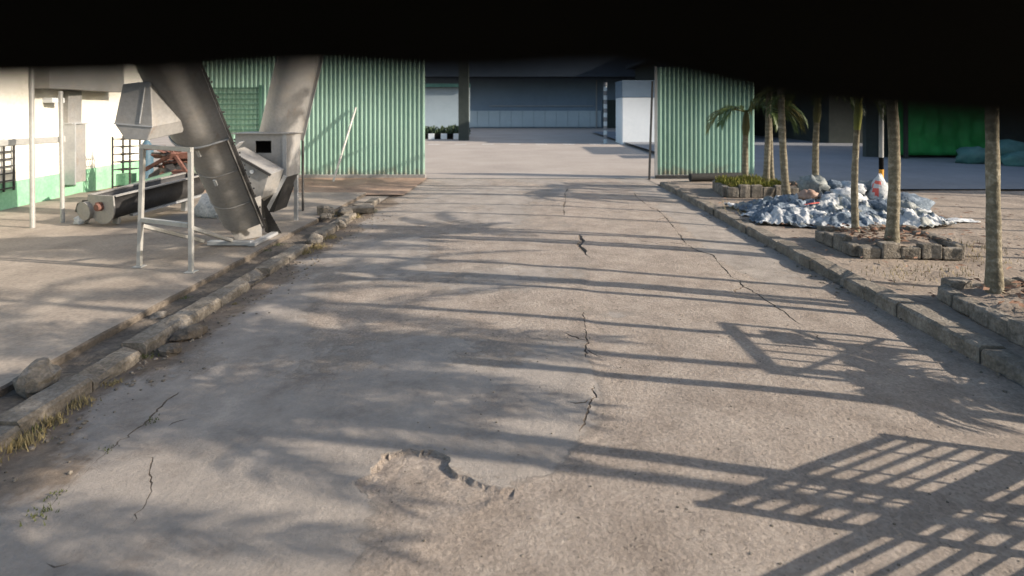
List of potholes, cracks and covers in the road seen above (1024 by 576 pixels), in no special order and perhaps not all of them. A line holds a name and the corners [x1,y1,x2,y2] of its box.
crack [562,312,602,358]
crack [38,392,186,518]
crack [635,194,800,324]
pothole [352,448,515,521]
